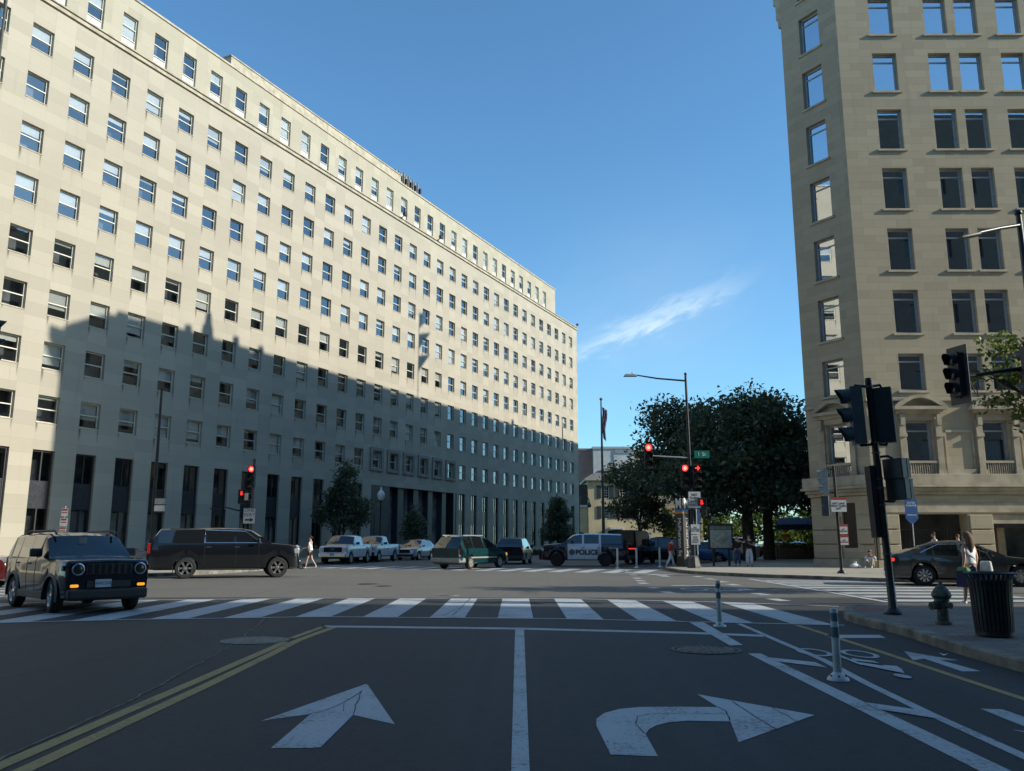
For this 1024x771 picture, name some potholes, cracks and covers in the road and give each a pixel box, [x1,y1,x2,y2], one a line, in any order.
manhole cover [220,636,290,645]
crack [310,690,362,715]
manhole cover [670,645,742,655]
